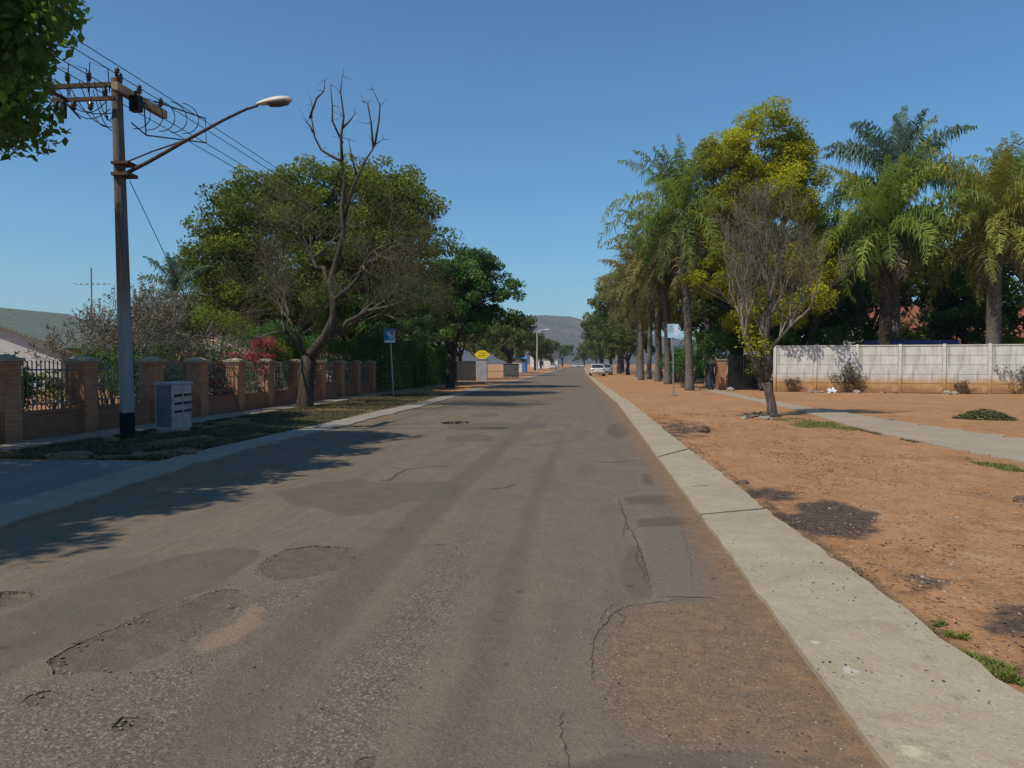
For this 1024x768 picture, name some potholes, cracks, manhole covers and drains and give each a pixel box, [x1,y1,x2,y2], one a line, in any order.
pothole [0,591,36,607]
pothole [22,690,60,707]
crack [590,497,712,680]
pothole [257,546,364,581]
pothole [111,717,149,733]
pothole [47,589,247,675]
crack [558,711,570,768]
